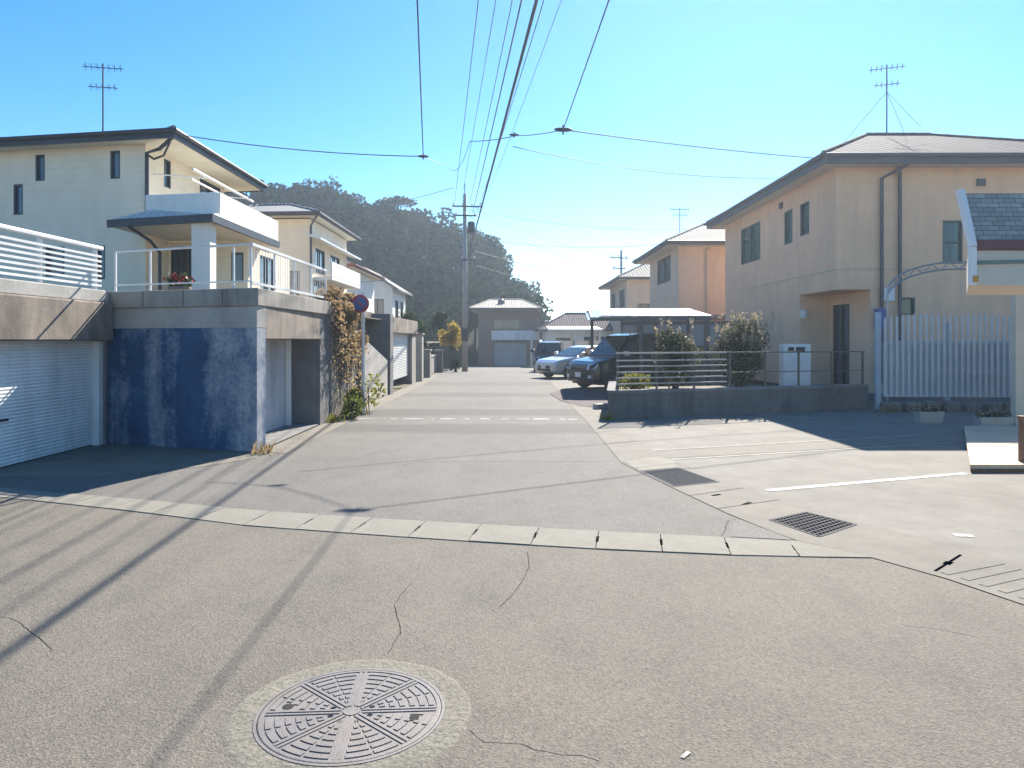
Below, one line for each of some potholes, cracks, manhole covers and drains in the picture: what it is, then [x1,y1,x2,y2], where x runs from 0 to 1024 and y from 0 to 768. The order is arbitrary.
drain grate [769,512,857,537]
drain grate [640,468,719,489]
crack [387,582,412,654]
manhole cover [221,659,472,768]
crack [0,617,52,650]
crack [469,730,602,762]
